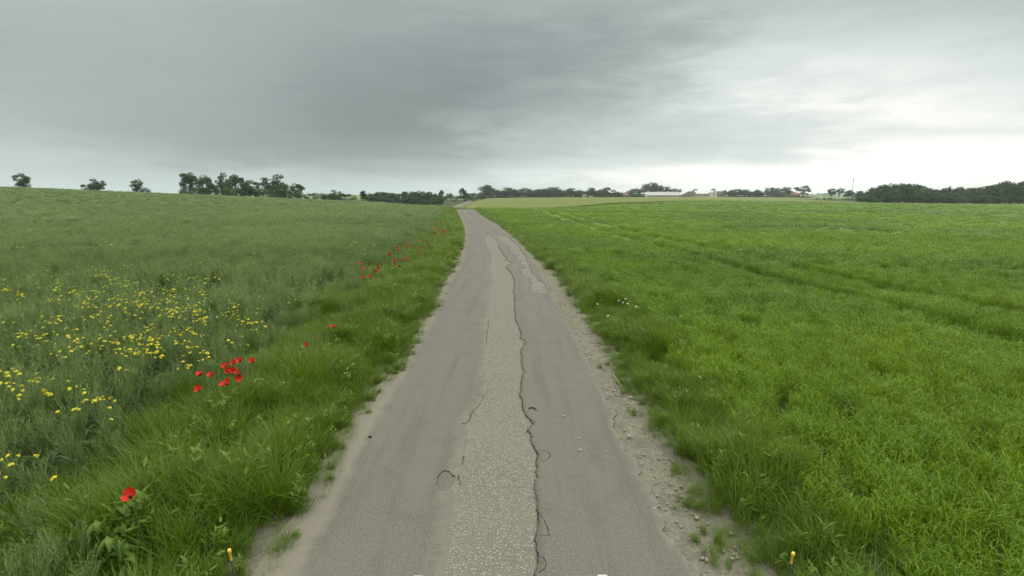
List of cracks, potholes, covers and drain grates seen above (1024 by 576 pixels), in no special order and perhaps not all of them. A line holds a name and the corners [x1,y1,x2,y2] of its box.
crack [498,247,551,576]
